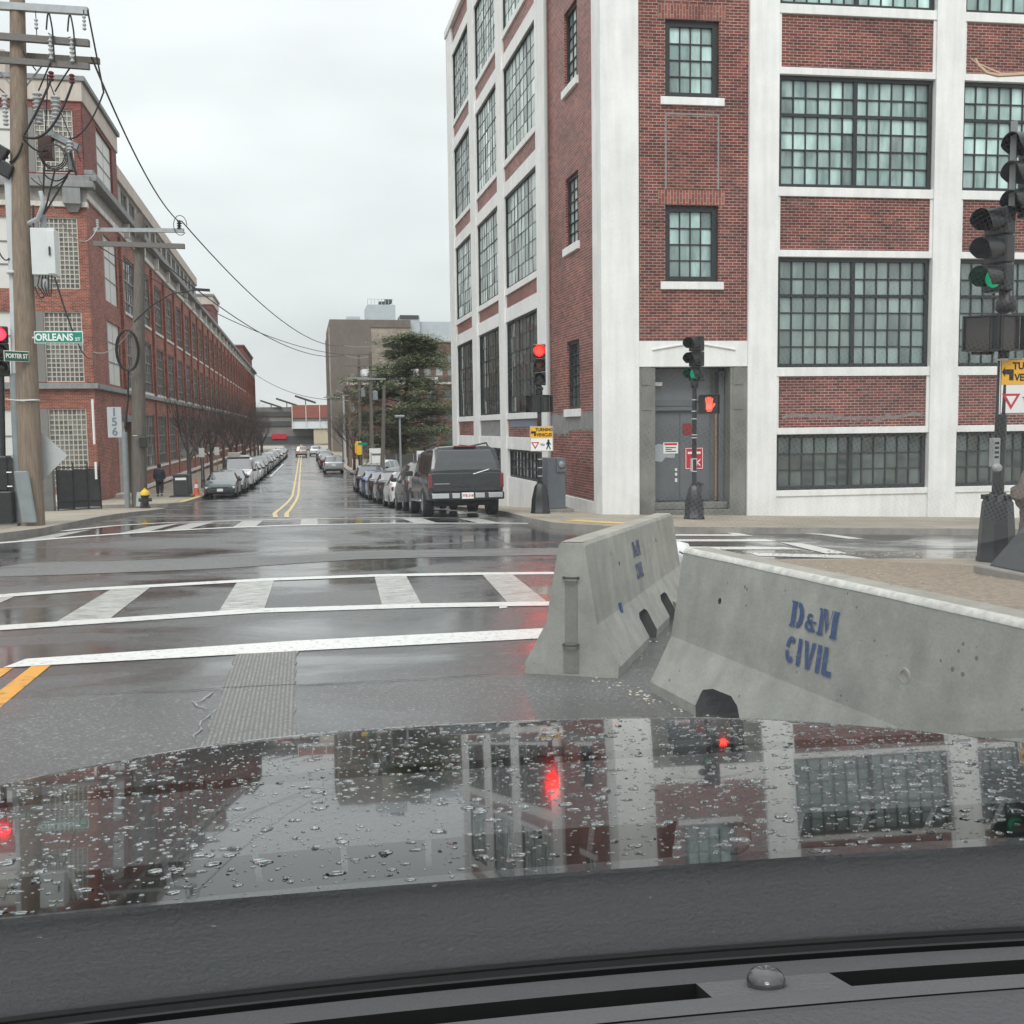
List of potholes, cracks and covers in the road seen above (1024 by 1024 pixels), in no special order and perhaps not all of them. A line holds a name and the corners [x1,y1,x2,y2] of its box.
crack [146,674,485,742]
